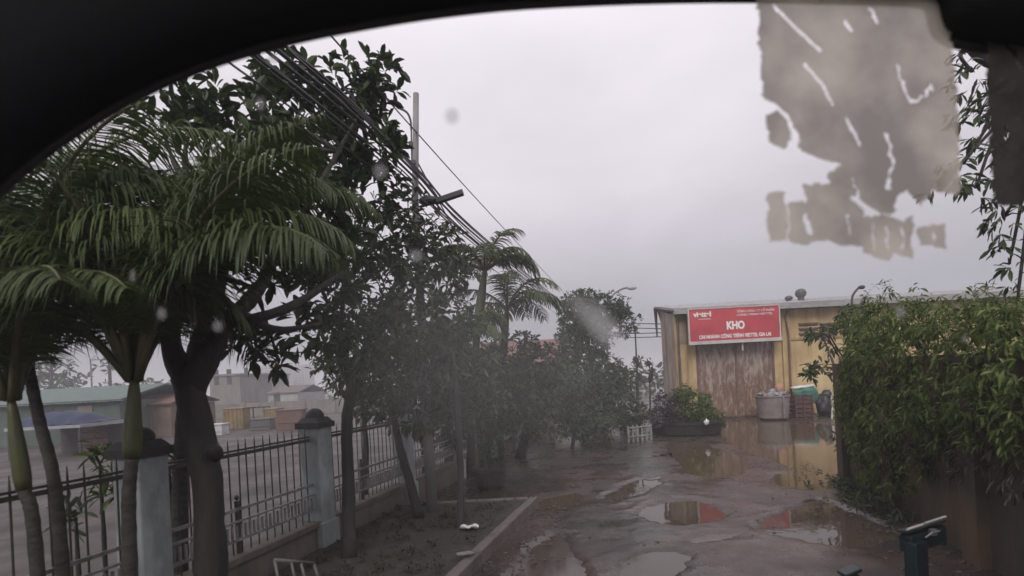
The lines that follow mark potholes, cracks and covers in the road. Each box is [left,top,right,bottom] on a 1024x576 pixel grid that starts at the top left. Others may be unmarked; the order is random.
pothole [622,495,739,525]
pothole [743,496,906,549]
pothole [500,528,603,576]
pothole [594,475,671,503]
pothole [598,543,705,576]
